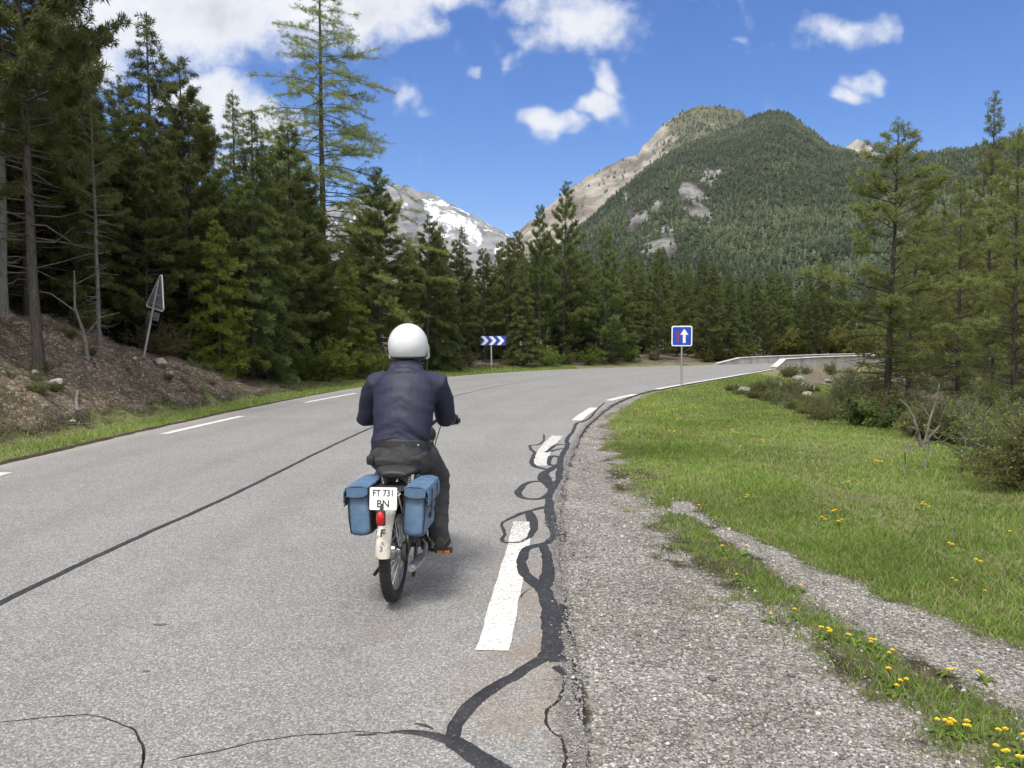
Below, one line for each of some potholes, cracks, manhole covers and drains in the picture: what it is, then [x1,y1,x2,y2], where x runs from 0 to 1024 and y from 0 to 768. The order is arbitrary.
crack [171,731,392,761]
crack [544,677,568,768]
crack [3,714,146,768]
